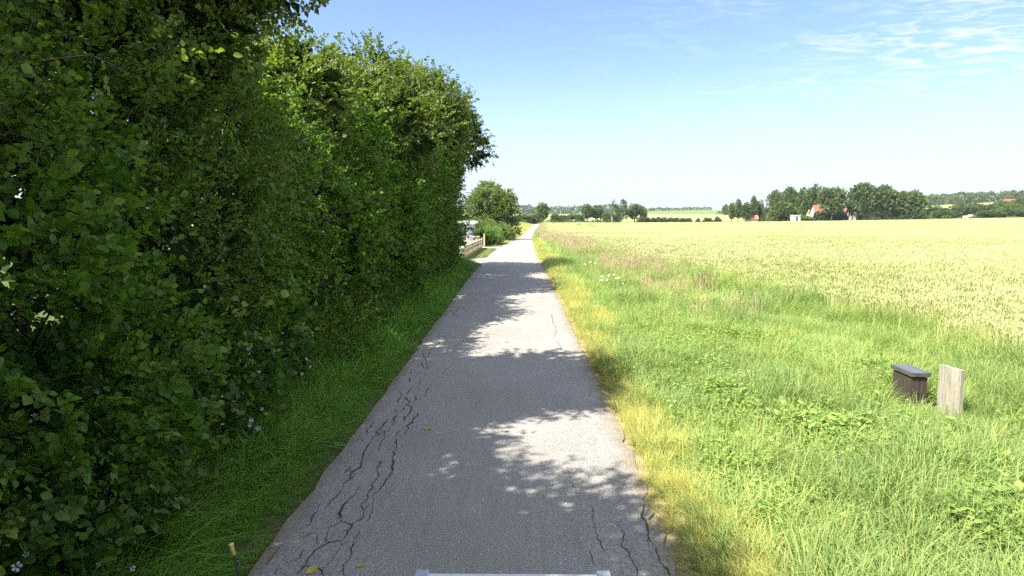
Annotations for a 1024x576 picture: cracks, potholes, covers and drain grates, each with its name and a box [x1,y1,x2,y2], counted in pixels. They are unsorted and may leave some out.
crack [584,492,671,576]
